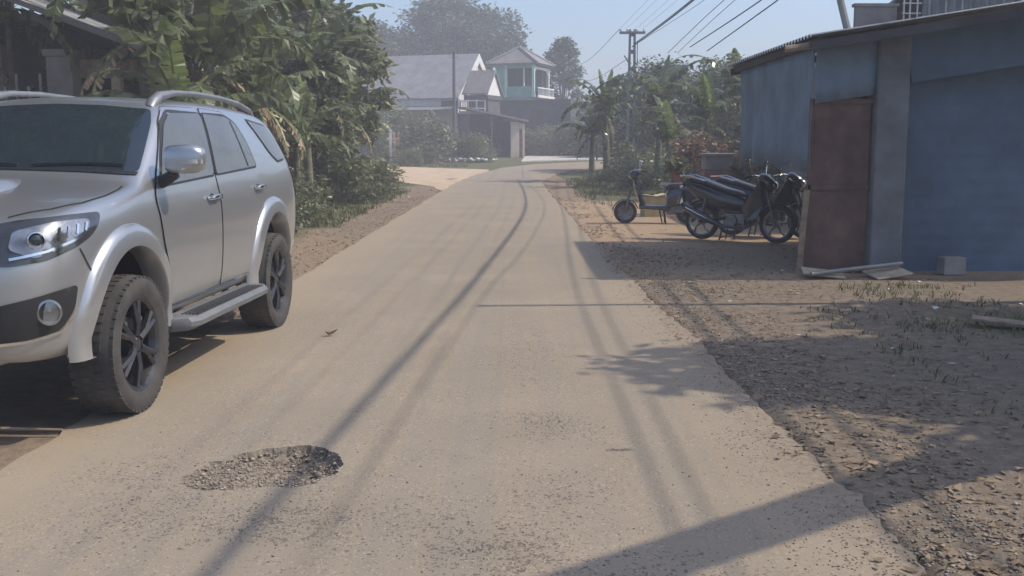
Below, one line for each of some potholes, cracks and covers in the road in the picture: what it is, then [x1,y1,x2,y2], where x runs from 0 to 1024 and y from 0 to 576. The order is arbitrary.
pothole [181,445,344,491]
